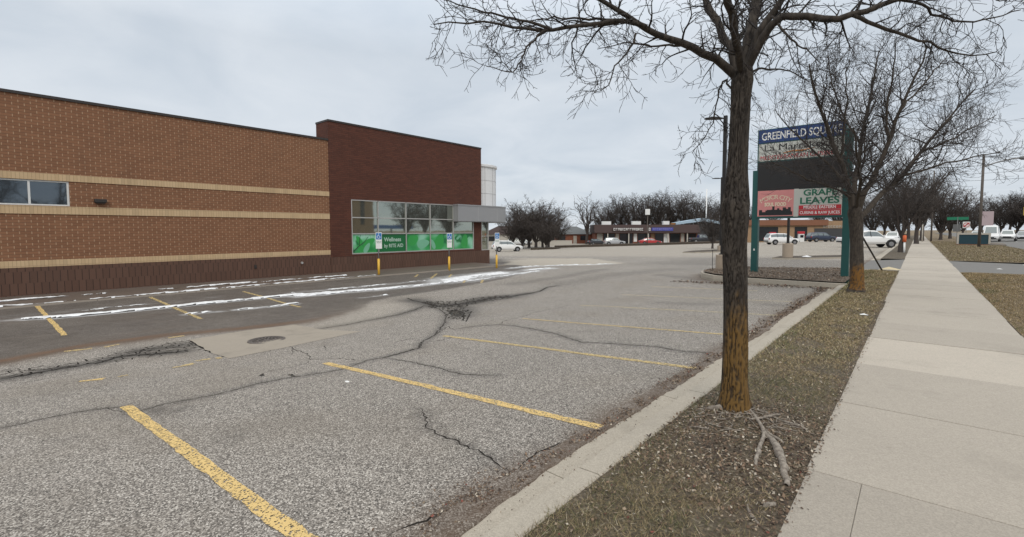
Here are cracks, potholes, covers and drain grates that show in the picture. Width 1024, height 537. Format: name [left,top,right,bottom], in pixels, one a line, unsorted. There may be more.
crack [9,287,709,427]
manhole cover [247,336,285,344]
crack [422,409,559,470]
